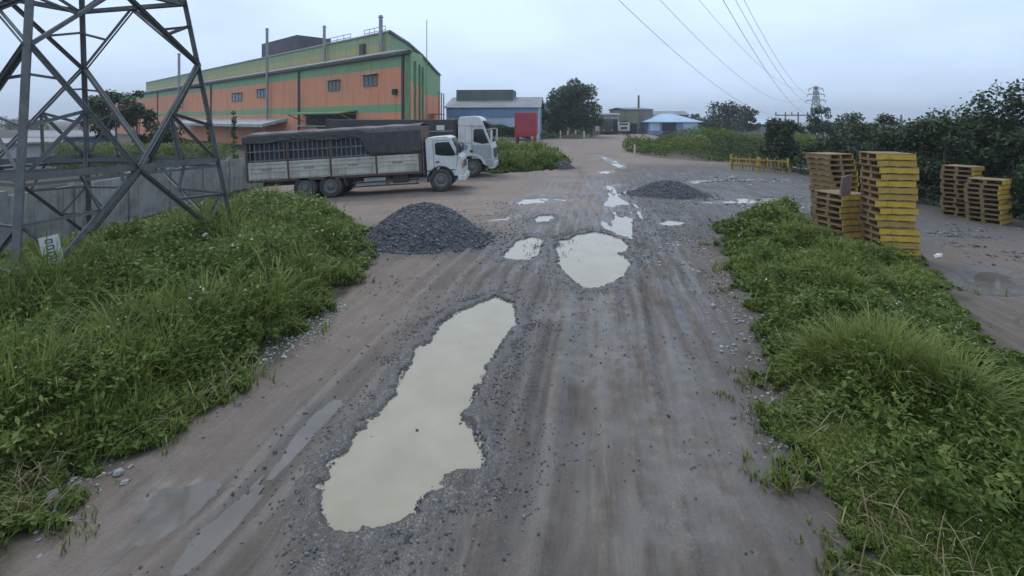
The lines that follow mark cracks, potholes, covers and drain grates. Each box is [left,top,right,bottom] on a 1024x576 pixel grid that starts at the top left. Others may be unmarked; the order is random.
pothole [540,230,643,292]
pothole [285,291,531,564]
pothole [492,234,560,263]
pothole [526,213,562,224]
